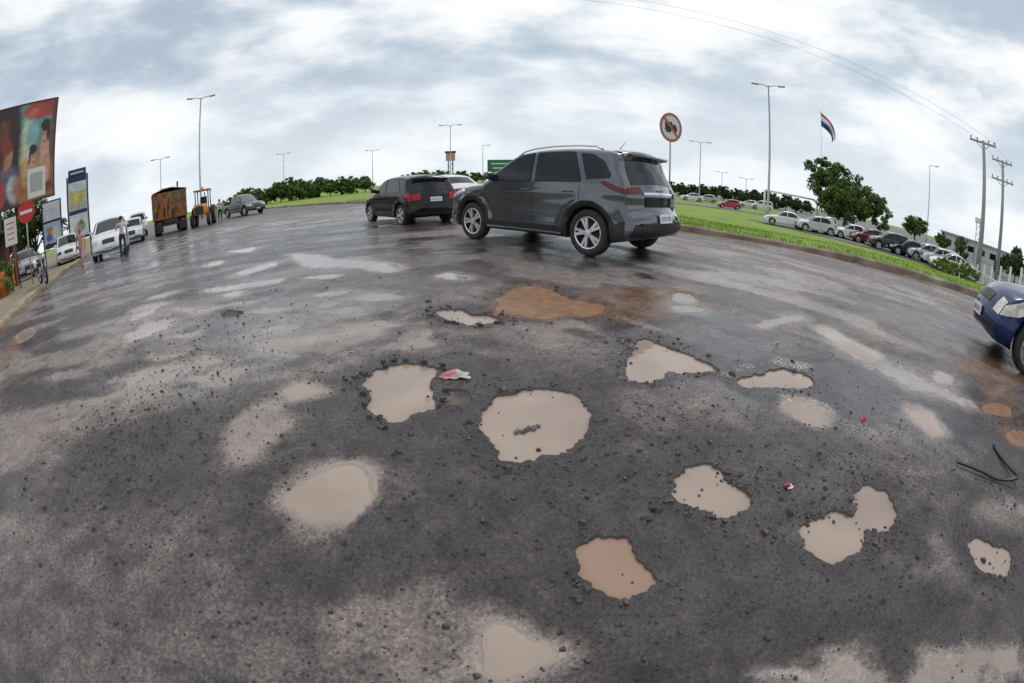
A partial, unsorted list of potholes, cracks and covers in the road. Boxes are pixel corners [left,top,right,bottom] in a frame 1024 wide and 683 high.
pothole [593,331,753,387]
pothole [283,455,401,526]
pothole [769,401,838,425]
pothole [736,359,828,402]
pothole [949,536,1023,599]
pothole [980,402,1017,418]
pothole [439,371,602,480]
pothole [761,470,925,585]
pothole [483,284,612,321]
pothole [419,300,525,329]
pothole [672,293,699,304]
